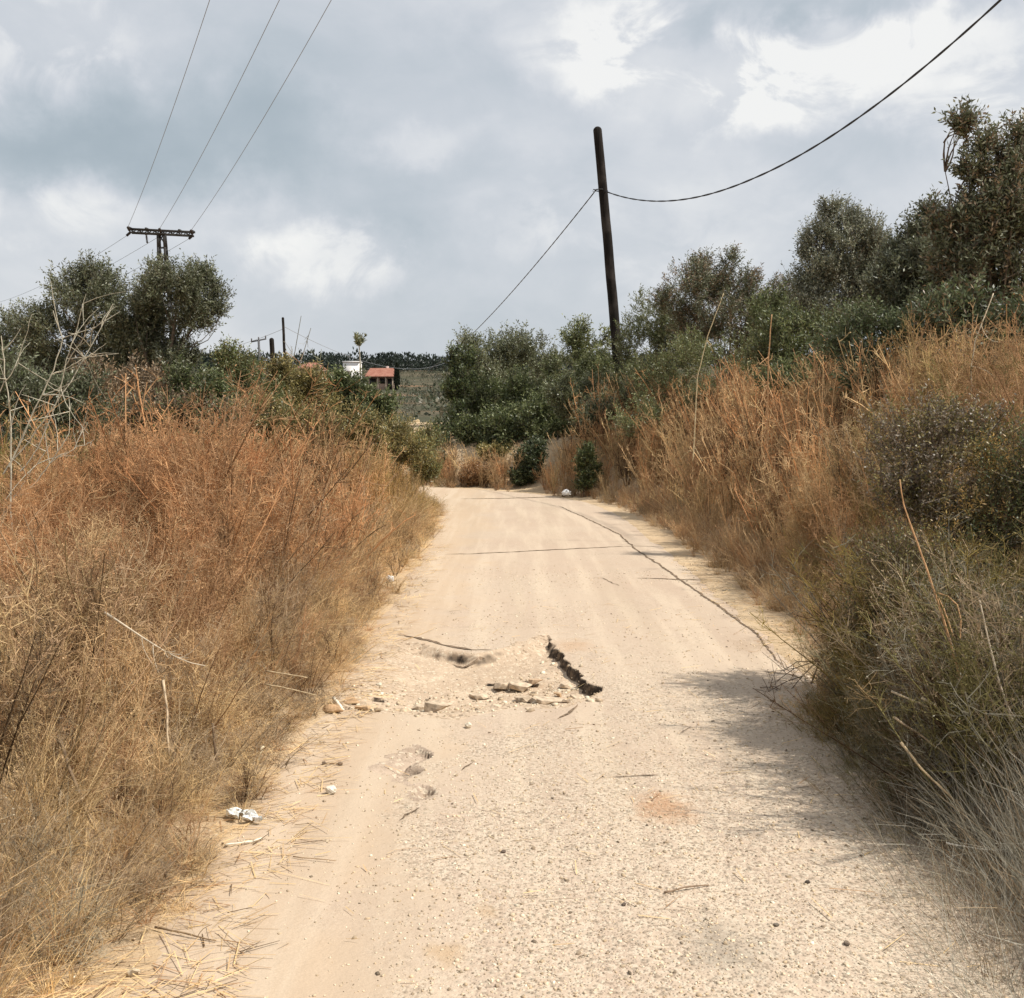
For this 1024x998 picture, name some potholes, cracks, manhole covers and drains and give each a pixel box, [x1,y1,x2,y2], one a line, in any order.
pothole [335,633,604,720]
pothole [367,744,434,786]
crack [398,634,493,668]
pothole [407,783,439,801]
crack [472,497,796,676]
